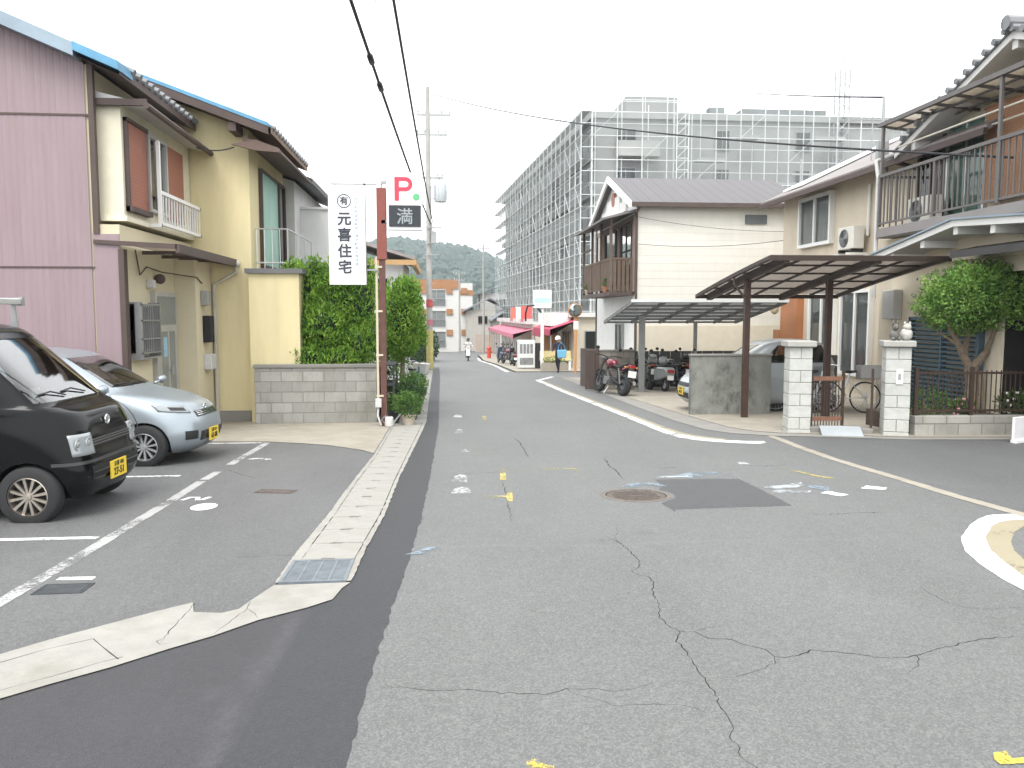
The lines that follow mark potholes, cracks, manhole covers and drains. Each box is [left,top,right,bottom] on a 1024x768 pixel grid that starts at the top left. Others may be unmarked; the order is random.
crack [608,533,1020,768]
utility cover [30,583,95,595]
drain grate [278,559,355,584]
manhole cover [600,488,672,502]
crack [385,683,716,713]
